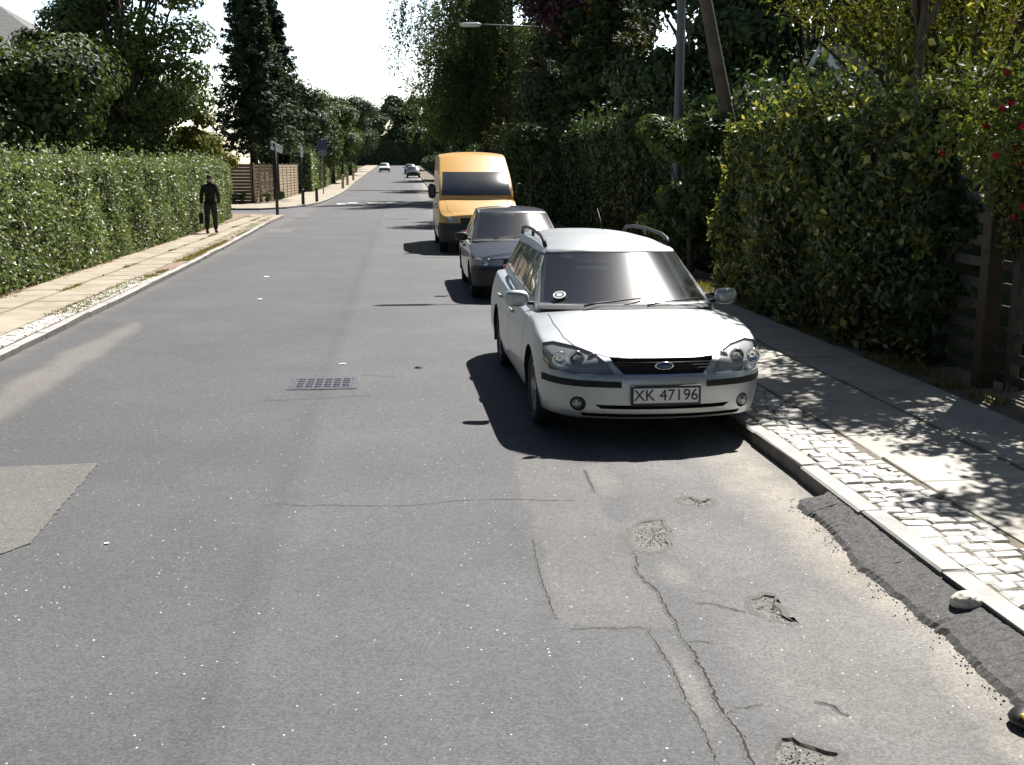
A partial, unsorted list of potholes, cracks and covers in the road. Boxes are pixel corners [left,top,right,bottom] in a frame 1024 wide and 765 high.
pothole [744,591,801,626]
pothole [674,496,720,509]
crack [814,700,850,717]
pothole [624,517,674,554]
crack [265,469,597,507]
crack [531,538,763,765]
pothole [762,733,849,765]
